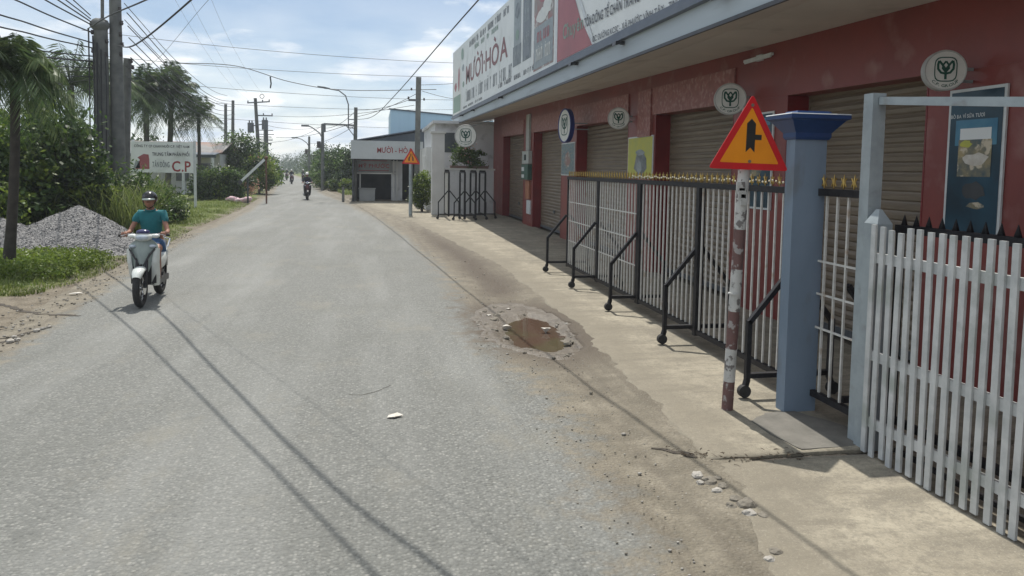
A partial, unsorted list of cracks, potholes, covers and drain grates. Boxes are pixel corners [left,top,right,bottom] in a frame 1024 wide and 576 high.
pothole [469,302,583,360]
